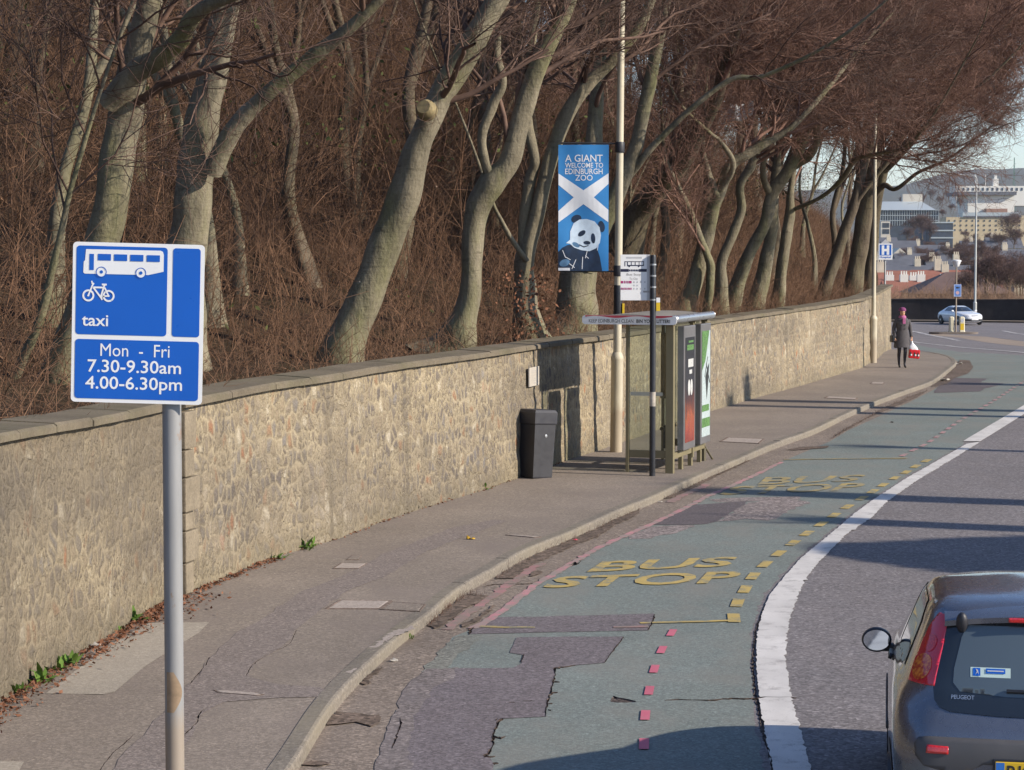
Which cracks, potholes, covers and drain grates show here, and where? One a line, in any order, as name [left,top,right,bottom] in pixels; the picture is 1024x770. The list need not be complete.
manhole cover [380,601,426,612]
manhole cover [325,600,392,609]
crack [483,665,575,765]
